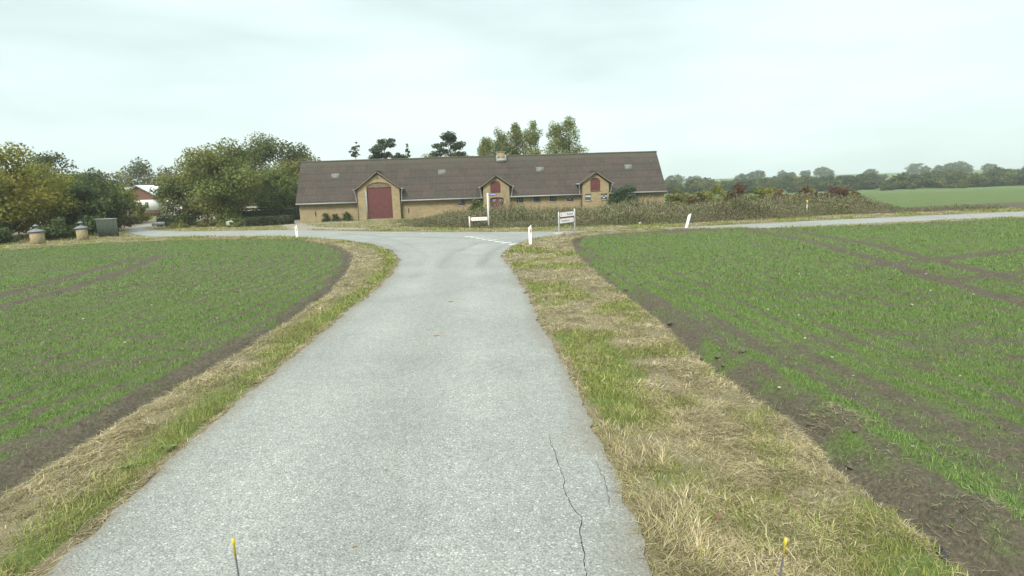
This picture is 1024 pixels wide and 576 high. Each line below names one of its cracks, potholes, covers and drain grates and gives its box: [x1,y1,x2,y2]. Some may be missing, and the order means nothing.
crack [549,432,587,576]
